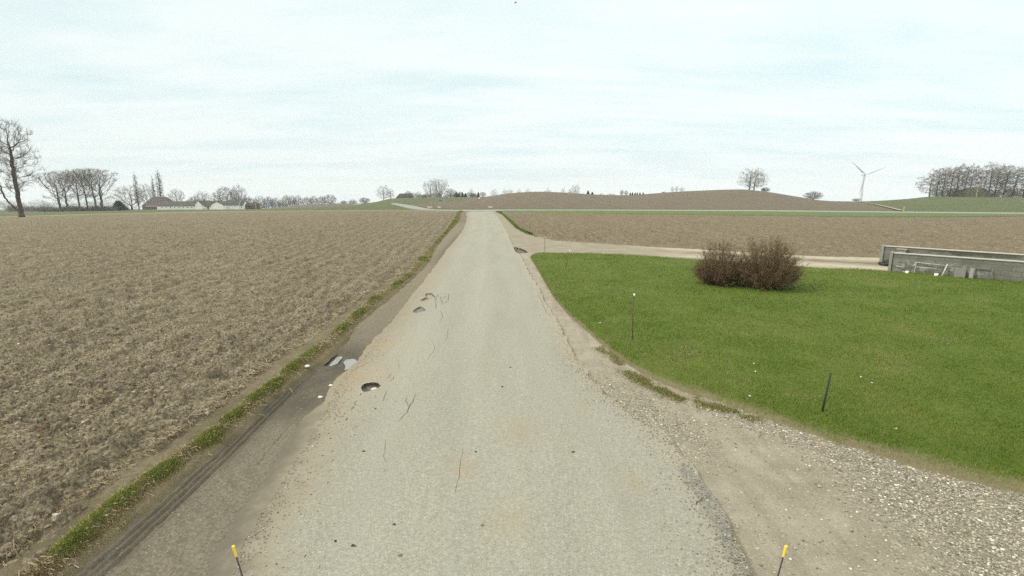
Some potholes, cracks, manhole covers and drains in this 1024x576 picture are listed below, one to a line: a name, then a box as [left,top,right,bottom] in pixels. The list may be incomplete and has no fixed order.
pothole [361,382,381,392]
